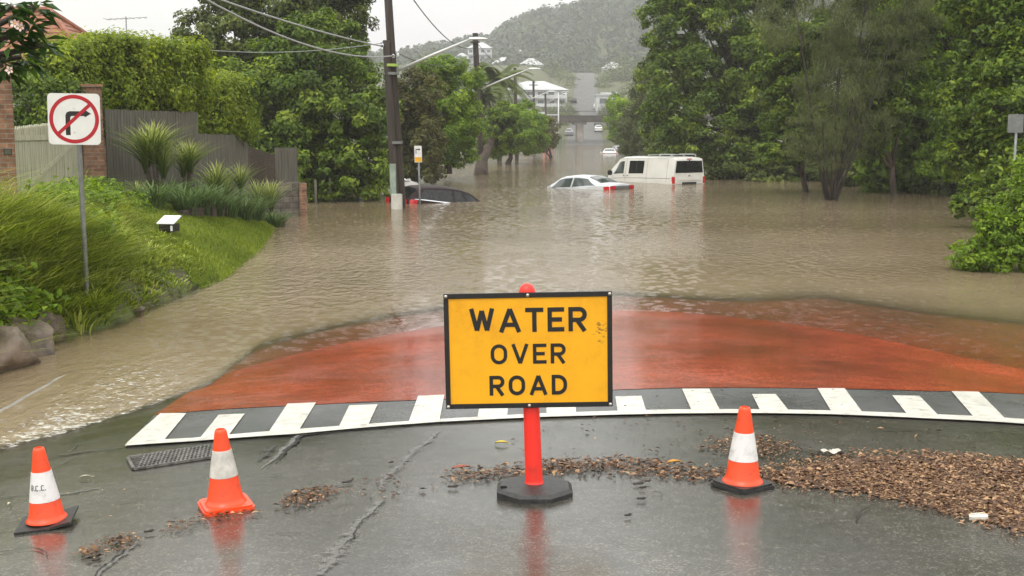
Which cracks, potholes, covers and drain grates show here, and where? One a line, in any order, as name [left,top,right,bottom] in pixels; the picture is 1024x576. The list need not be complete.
crack [264,430,441,575]
drain grate [126,443,213,471]
